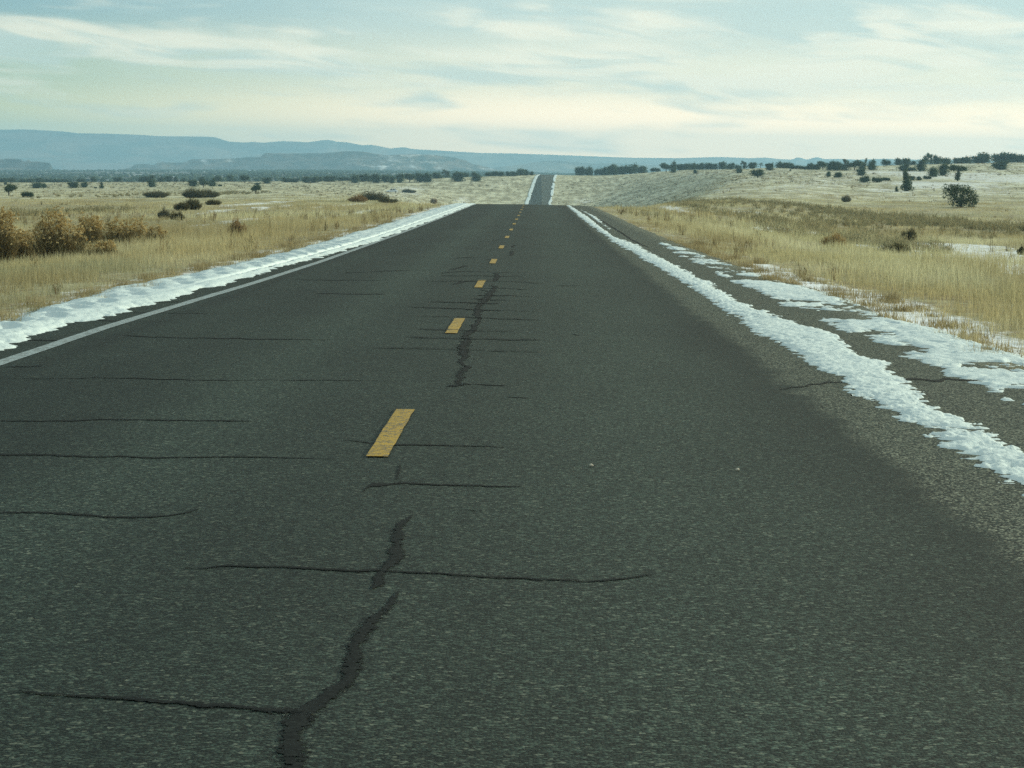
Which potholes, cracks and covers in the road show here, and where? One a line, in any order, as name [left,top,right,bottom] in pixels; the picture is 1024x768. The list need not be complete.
crack [450,257,488,284]
crack [360,465,513,511]
crack [780,378,976,390]
crack [0,508,199,518]
